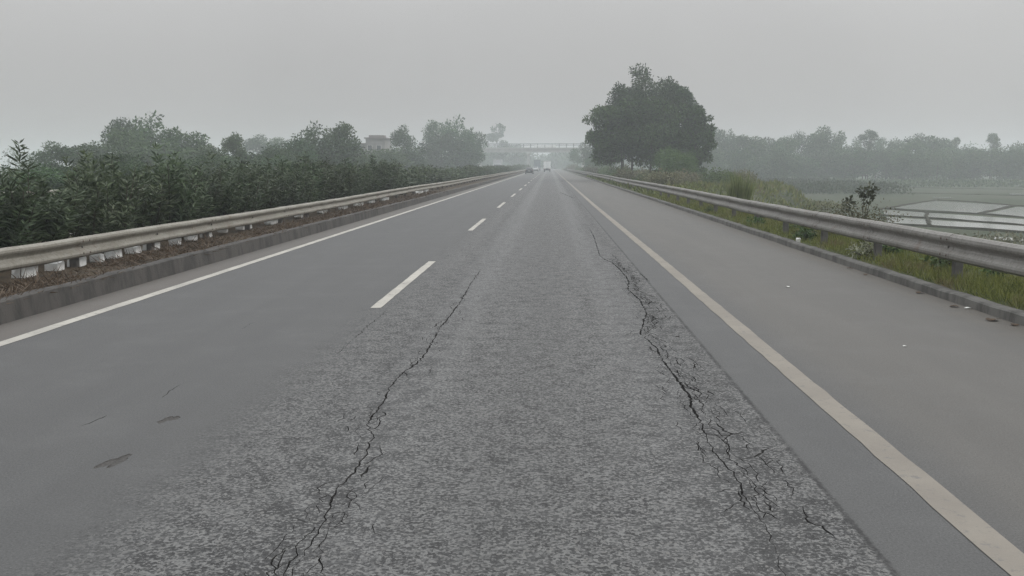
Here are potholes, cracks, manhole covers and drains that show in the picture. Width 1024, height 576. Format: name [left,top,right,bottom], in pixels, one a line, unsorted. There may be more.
crack [244,271,480,576]
crack [589,229,834,576]
